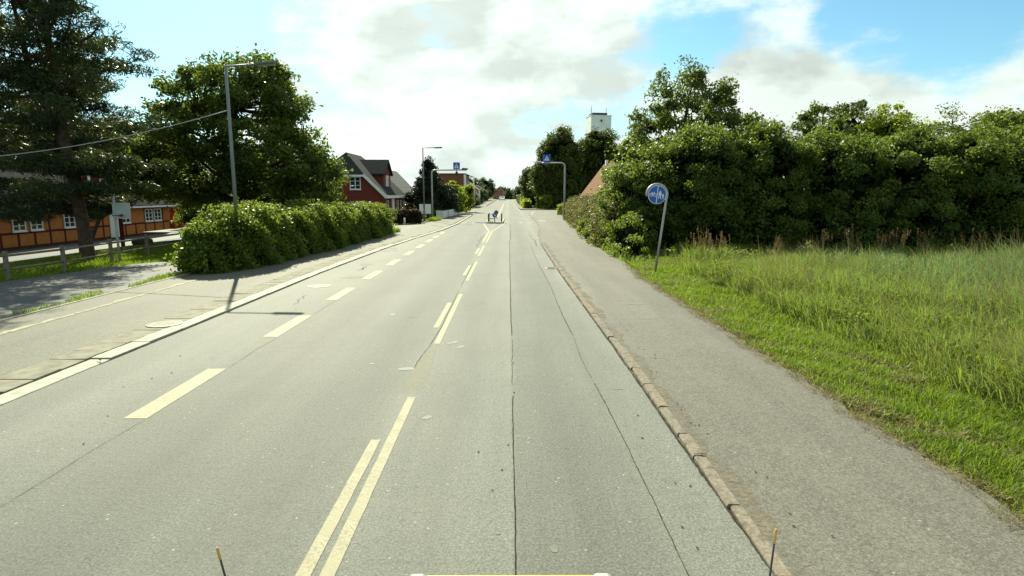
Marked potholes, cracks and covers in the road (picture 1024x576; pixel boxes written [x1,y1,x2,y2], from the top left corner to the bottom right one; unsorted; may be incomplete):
manhole cover [146,320,183,328]
